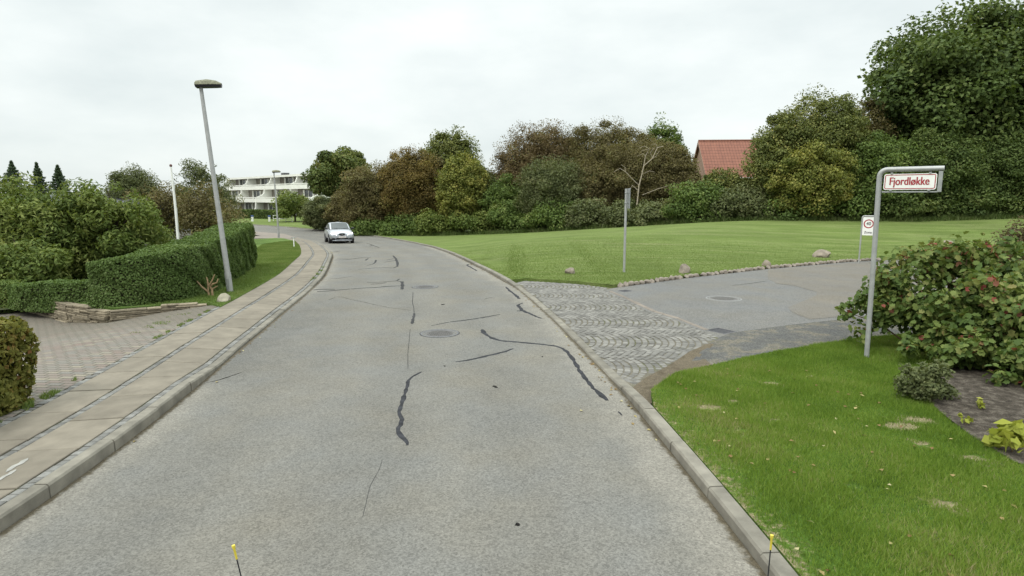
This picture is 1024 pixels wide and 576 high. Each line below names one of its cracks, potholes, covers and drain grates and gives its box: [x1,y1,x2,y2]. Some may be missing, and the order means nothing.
manhole cover [420,329,460,338]
